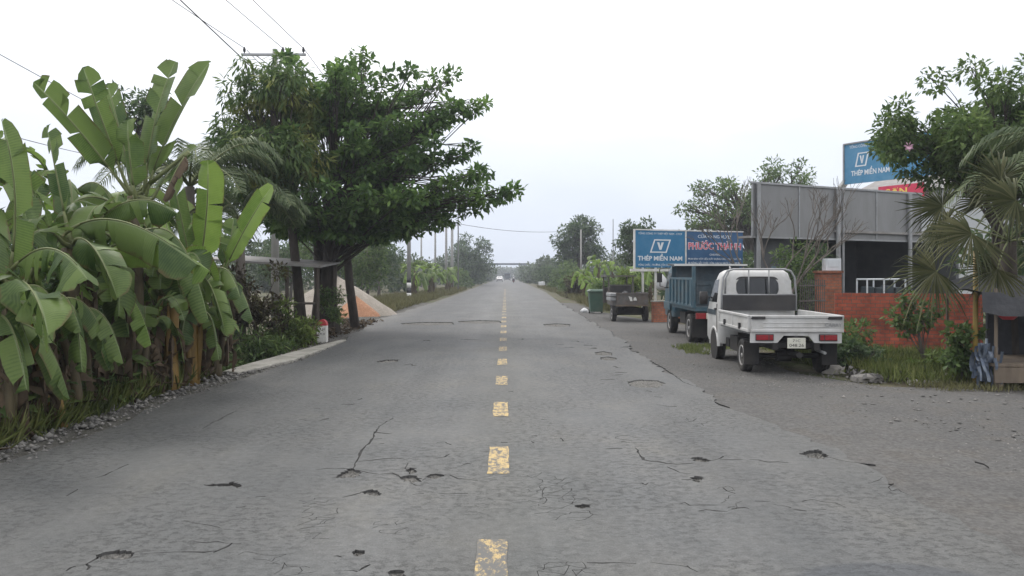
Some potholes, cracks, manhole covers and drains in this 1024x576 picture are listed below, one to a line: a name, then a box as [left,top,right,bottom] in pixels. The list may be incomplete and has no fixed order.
crack [133,521,311,576]
crack [608,435,909,495]
pothole [401,475,422,483]
pothole [96,549,134,560]
crack [316,418,564,497]
pothole [799,449,829,459]
pothole [628,380,666,388]
crack [560,341,730,425]
